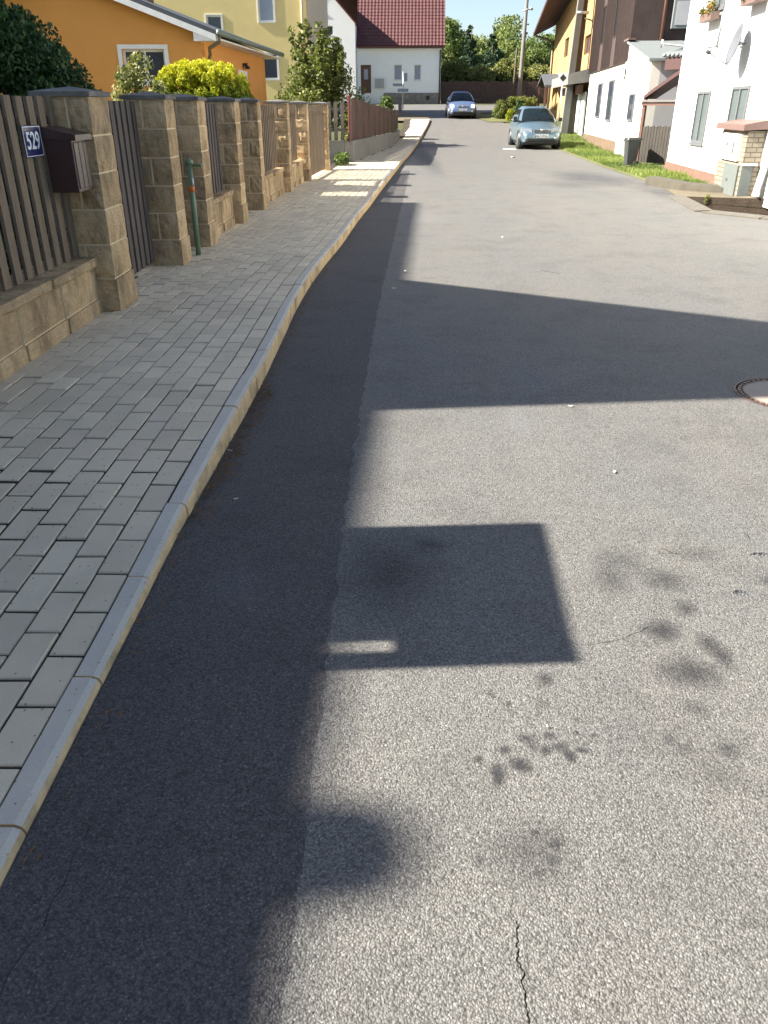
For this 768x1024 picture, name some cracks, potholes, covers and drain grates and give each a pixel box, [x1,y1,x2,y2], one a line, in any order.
crack [516,921,530,1024]
manhole cover [734,378,768,407]
